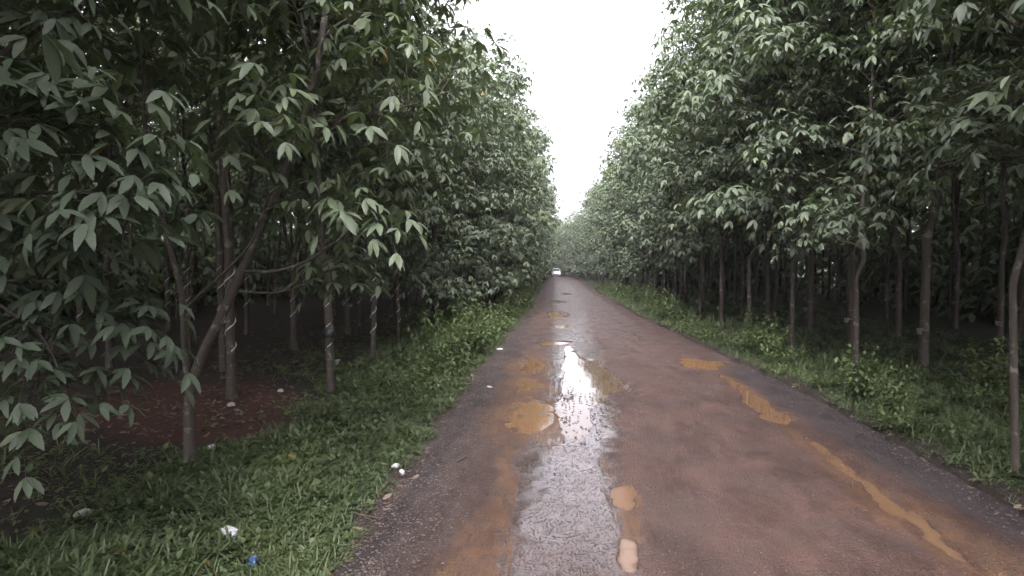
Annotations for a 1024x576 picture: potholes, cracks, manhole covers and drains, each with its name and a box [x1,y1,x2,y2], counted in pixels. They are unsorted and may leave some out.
pothole [515,357,546,374]
pothole [553,345,628,439]
pothole [609,486,639,512]
pothole [676,358,726,370]
pothole [616,537,640,573]
pothole [502,398,556,434]
